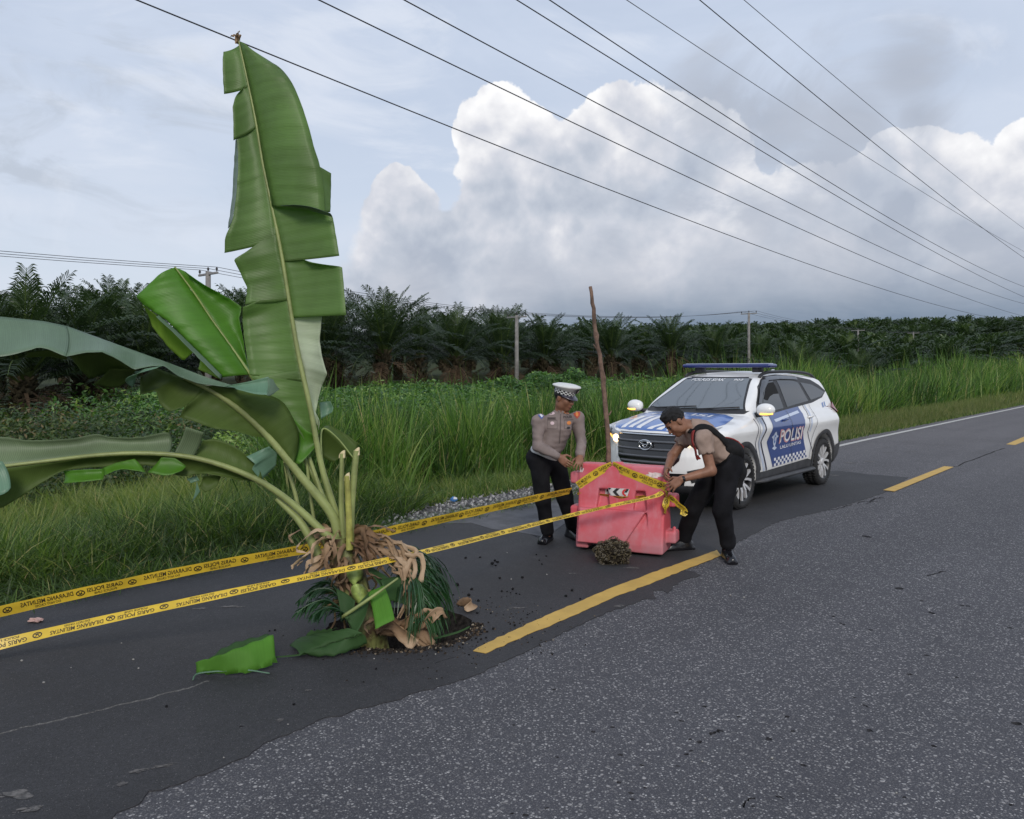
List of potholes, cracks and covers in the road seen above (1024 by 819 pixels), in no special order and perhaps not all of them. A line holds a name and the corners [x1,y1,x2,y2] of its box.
crack [0,681,208,734]
pothole [326,607,472,650]
